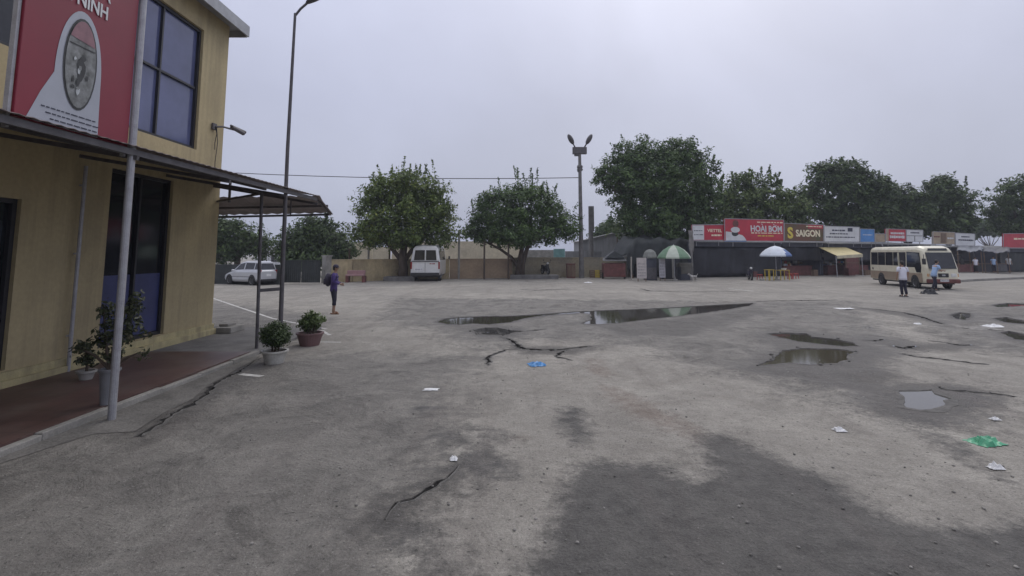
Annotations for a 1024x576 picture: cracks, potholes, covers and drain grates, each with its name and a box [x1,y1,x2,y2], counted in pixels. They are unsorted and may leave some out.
crack [134,358,263,437]
pothole [435,303,755,325]
pothole [765,331,859,347]
crack [482,329,593,366]
pothole [998,331,1024,340]
pothole [947,312,975,320]
pothole [756,346,859,366]
crack [383,466,460,520]
pothole [894,388,959,413]
crack [864,308,989,365]
crack [931,385,1017,397]
